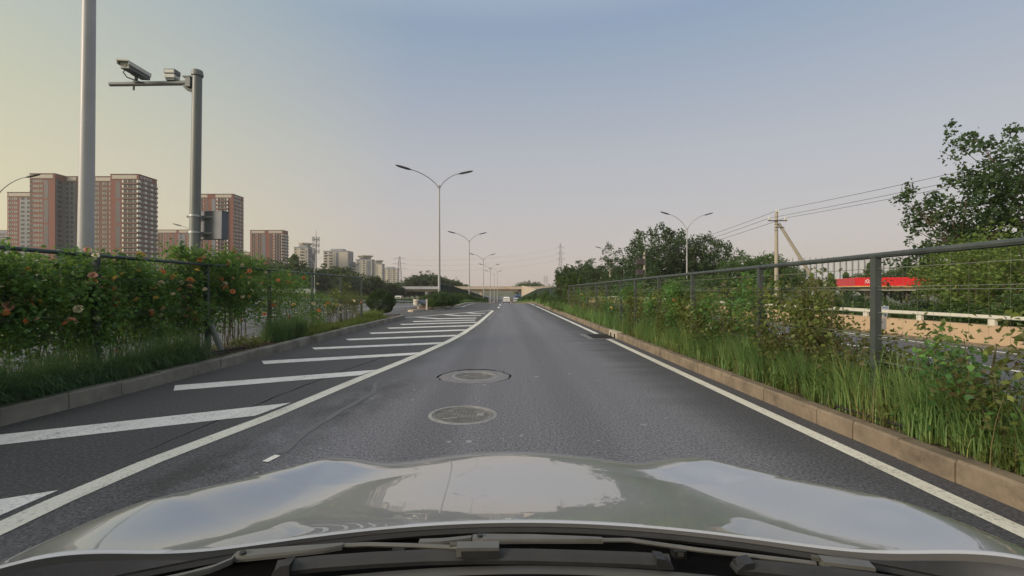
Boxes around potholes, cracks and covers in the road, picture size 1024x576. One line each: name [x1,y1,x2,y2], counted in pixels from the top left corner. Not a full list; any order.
manhole cover [428,406,498,425]
manhole cover [439,370,509,384]
